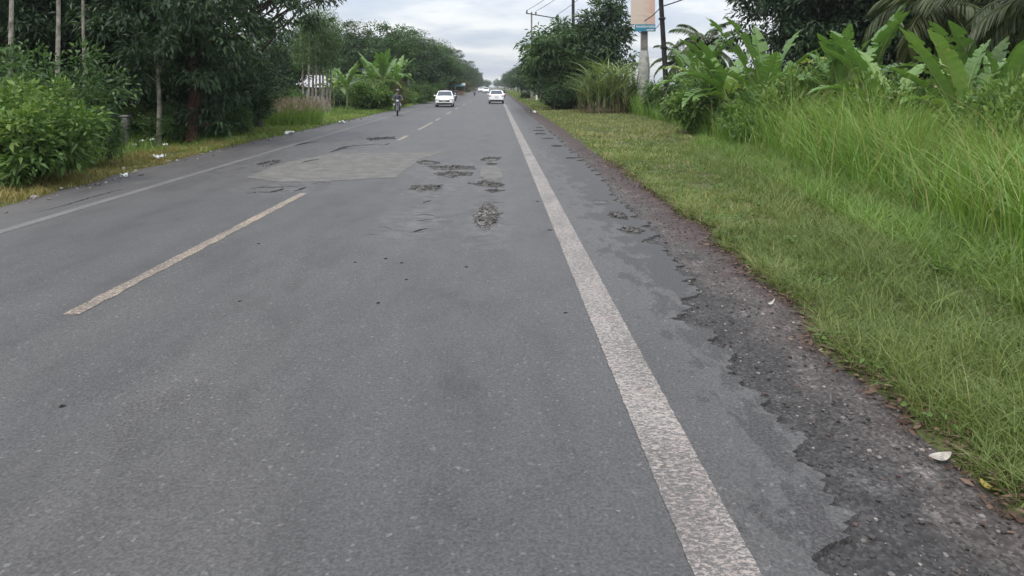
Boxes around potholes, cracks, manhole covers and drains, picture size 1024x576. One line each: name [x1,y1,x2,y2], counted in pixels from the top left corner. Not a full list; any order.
pothole [472,202,503,231]
pothole [617,226,645,234]
pothole [468,180,505,188]
pothole [608,211,629,221]
